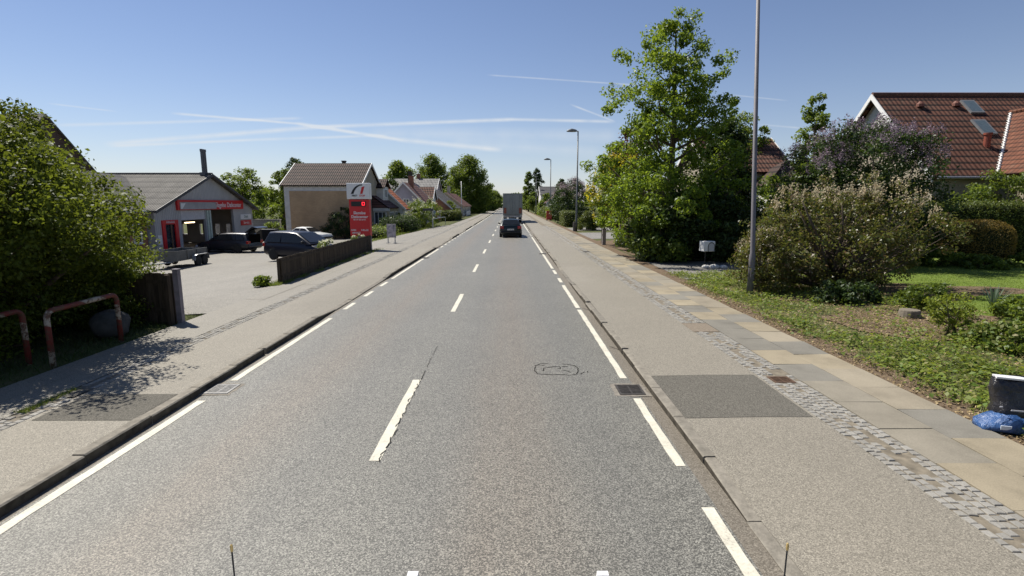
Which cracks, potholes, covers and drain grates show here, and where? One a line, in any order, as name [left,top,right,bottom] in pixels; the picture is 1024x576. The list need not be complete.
drain grate [200,383,245,395]
drain grate [610,383,652,397]
crack [534,363,588,375]
drain grate [763,376,799,384]
